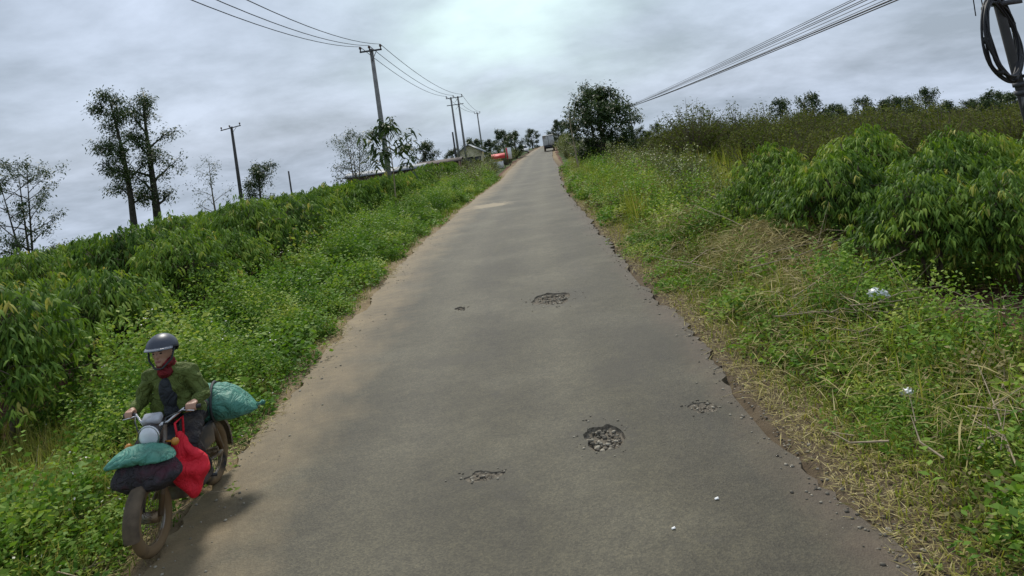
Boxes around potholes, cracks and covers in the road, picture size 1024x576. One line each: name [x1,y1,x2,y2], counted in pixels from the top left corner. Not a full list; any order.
pothole [583,424,626,452]
pothole [464,470,505,483]
pothole [687,402,718,413]
pothole [531,292,570,305]
